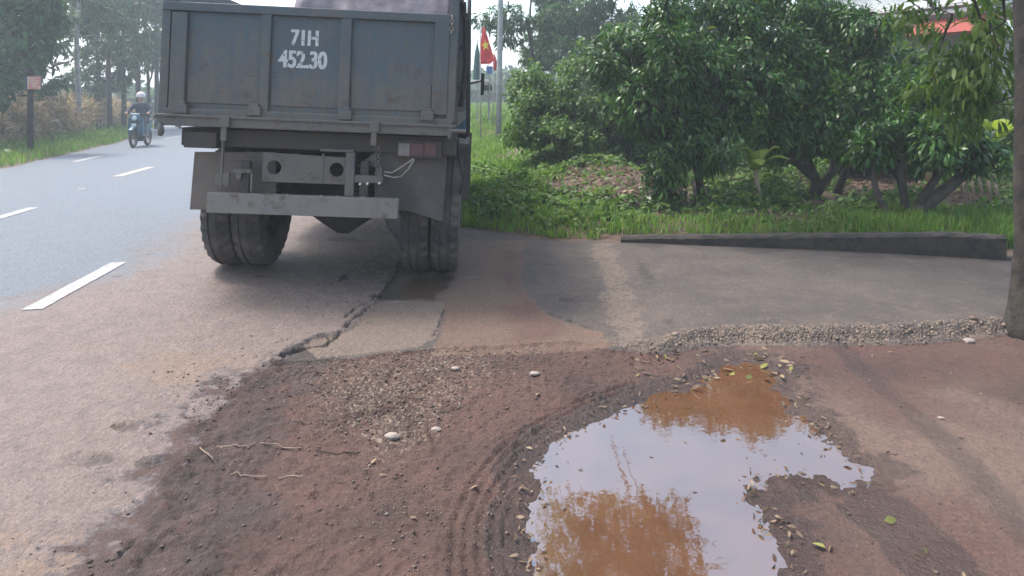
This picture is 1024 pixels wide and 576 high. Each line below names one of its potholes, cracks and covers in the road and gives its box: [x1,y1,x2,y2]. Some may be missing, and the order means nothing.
pothole [504,351,903,576]
crack [277,270,397,368]
